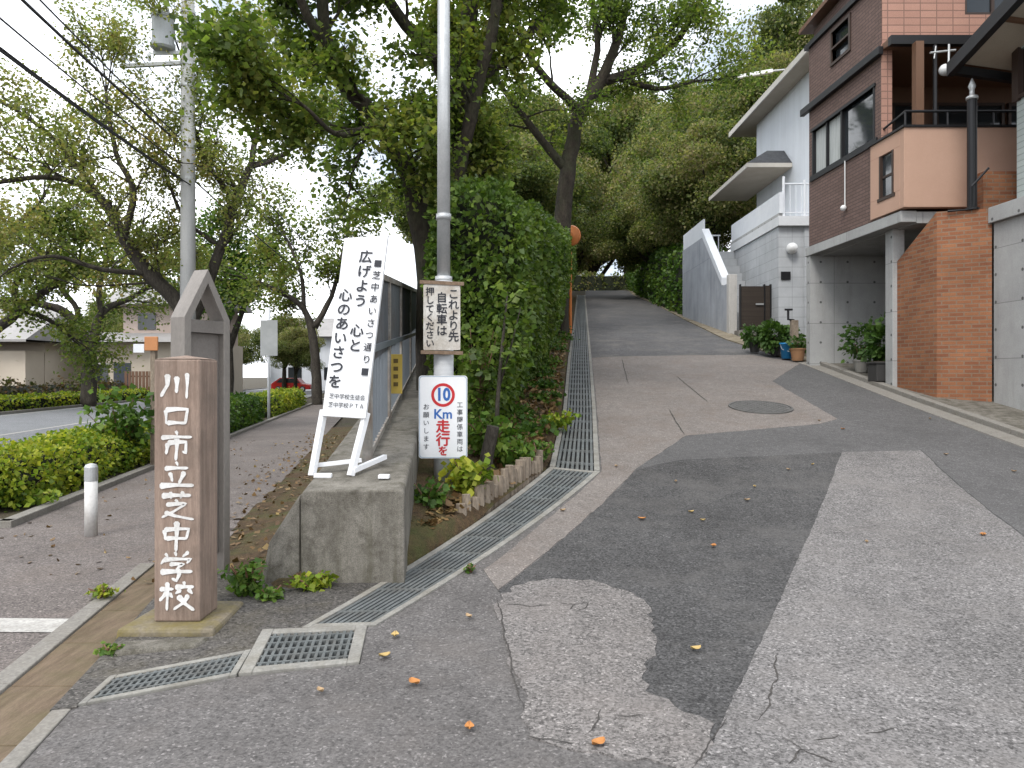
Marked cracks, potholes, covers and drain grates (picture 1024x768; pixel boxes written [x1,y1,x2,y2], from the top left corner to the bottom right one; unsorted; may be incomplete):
crack [758,655,779,720]
drain grate [238,625,367,677]
manhole cover [728,400,794,414]
drain grate [302,467,600,628]
crack [788,736,837,764]
drain grate [78,649,251,707]
crack [527,711,641,743]
drain grate [550,295,600,471]
